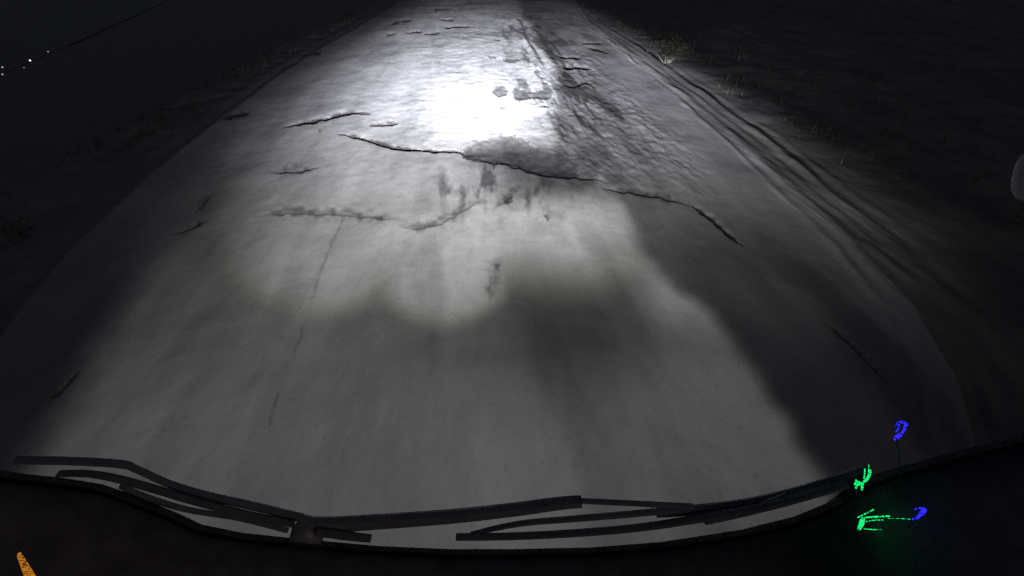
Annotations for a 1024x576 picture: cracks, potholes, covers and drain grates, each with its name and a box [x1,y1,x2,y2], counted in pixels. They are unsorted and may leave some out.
crack [253,112,743,305]
crack [386,8,470,36]
crack [823,319,888,384]
pothole [492,85,508,98]
crack [266,388,280,432]
